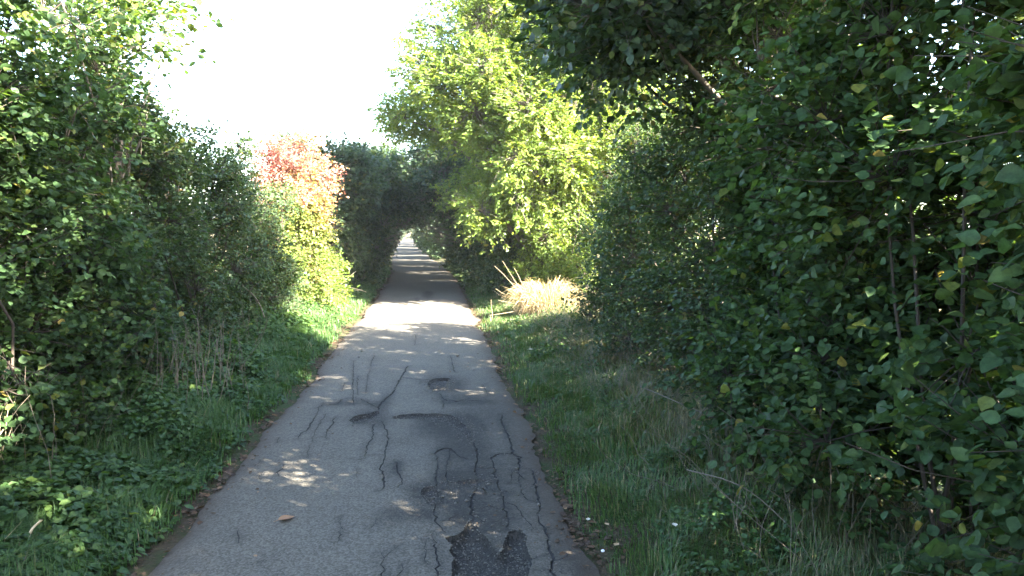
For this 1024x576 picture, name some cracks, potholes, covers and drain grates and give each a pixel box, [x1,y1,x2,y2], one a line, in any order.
crack [298,357,418,490]
pothole [427,378,451,391]
crack [424,415,568,576]
